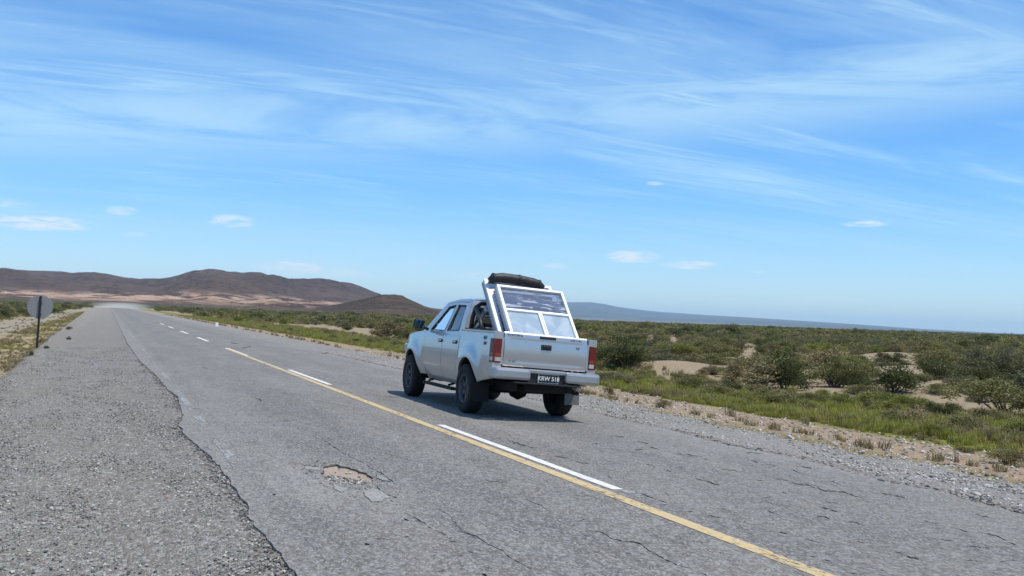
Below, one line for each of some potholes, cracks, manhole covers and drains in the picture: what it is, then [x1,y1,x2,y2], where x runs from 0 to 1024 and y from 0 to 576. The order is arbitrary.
pothole [320,464,373,486]
crack [577,519,708,576]
crack [317,438,532,572]
